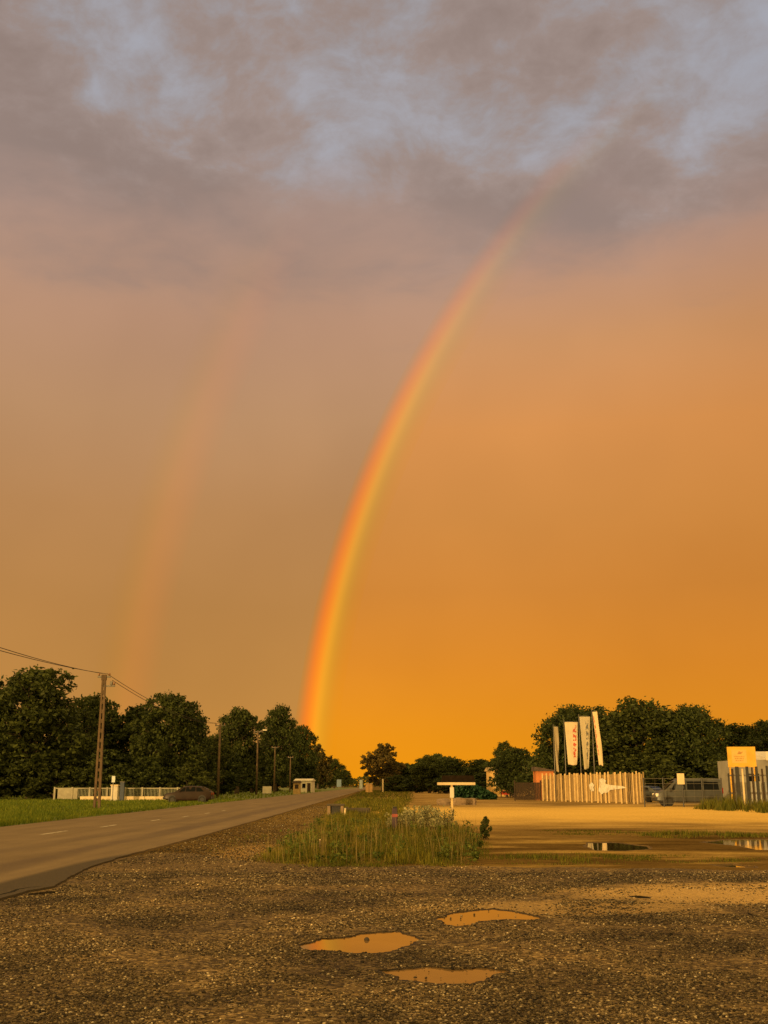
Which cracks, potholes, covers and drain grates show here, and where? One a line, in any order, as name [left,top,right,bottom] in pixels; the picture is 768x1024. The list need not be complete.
pothole [703,839,768,850]
pothole [434,908,547,927]
pothole [583,842,651,851]
pothole [297,931,422,954]
pothole [375,965,513,985]
